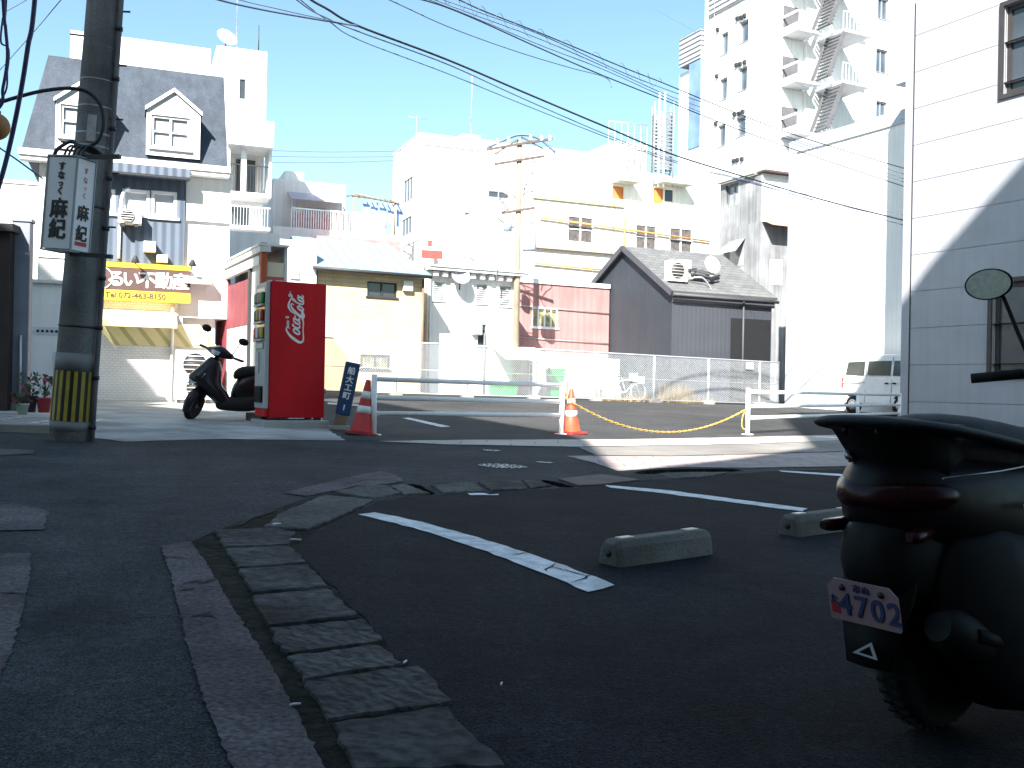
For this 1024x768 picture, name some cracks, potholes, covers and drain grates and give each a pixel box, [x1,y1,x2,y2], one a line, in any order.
crack [514,551,595,582]
